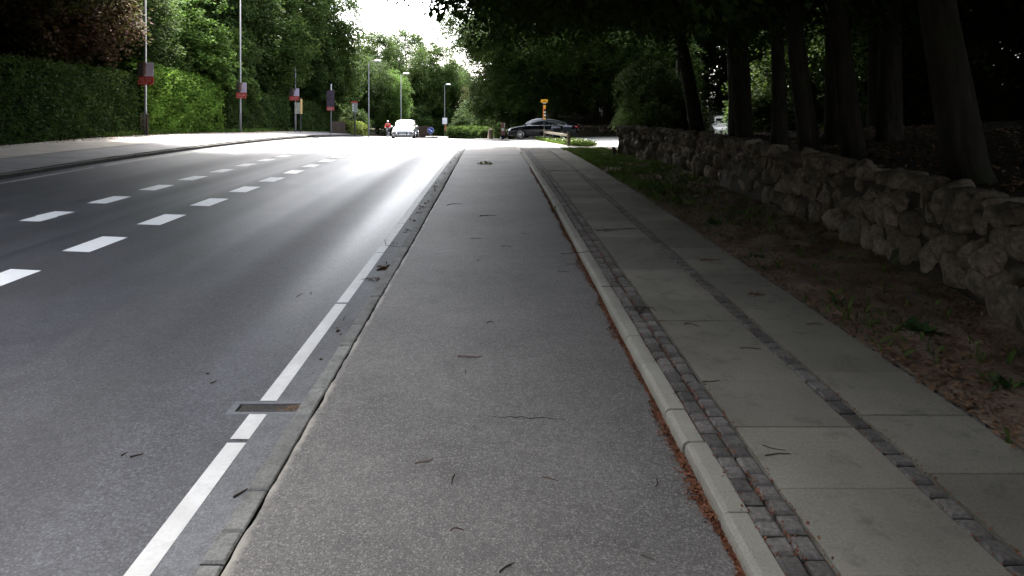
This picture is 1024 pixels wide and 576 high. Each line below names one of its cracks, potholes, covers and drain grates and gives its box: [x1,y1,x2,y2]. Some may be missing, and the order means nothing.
drain grate [225,401,303,414]
